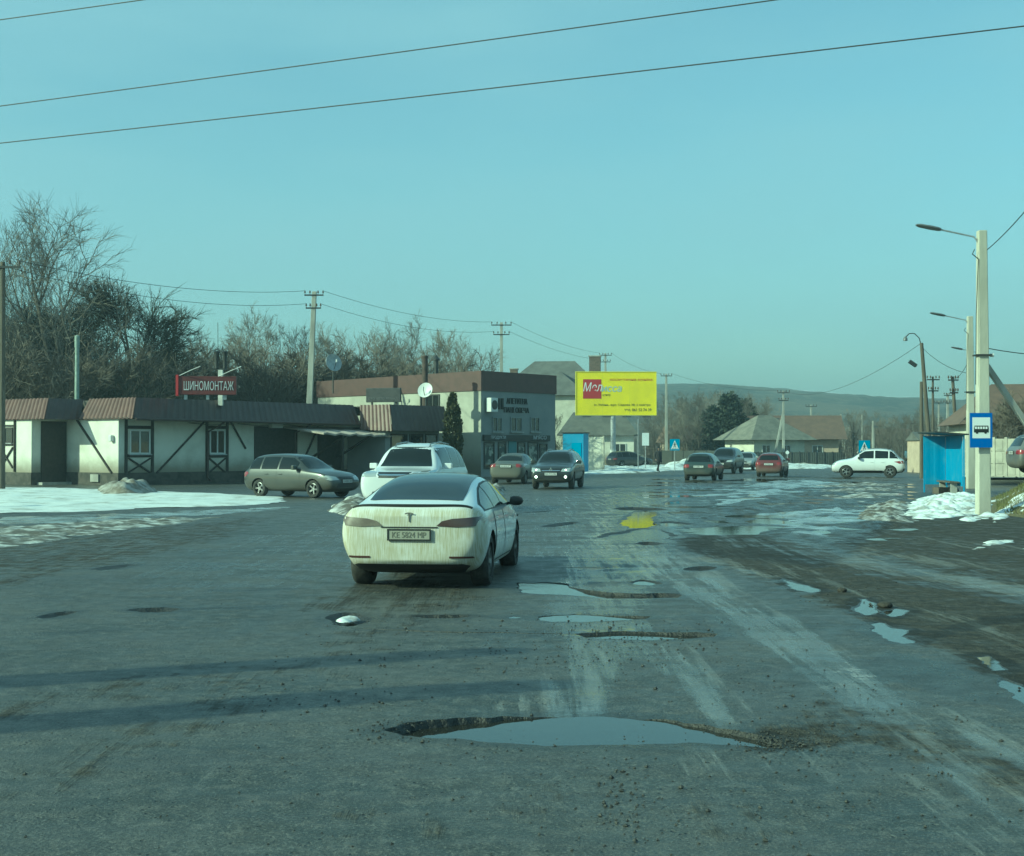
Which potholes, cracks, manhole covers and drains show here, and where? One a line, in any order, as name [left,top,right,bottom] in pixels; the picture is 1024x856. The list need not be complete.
pothole [36,611,80,619]
pothole [538,614,650,622]
pothole [577,631,717,640]
pothole [515,582,681,599]
pothole [384,716,782,748]
